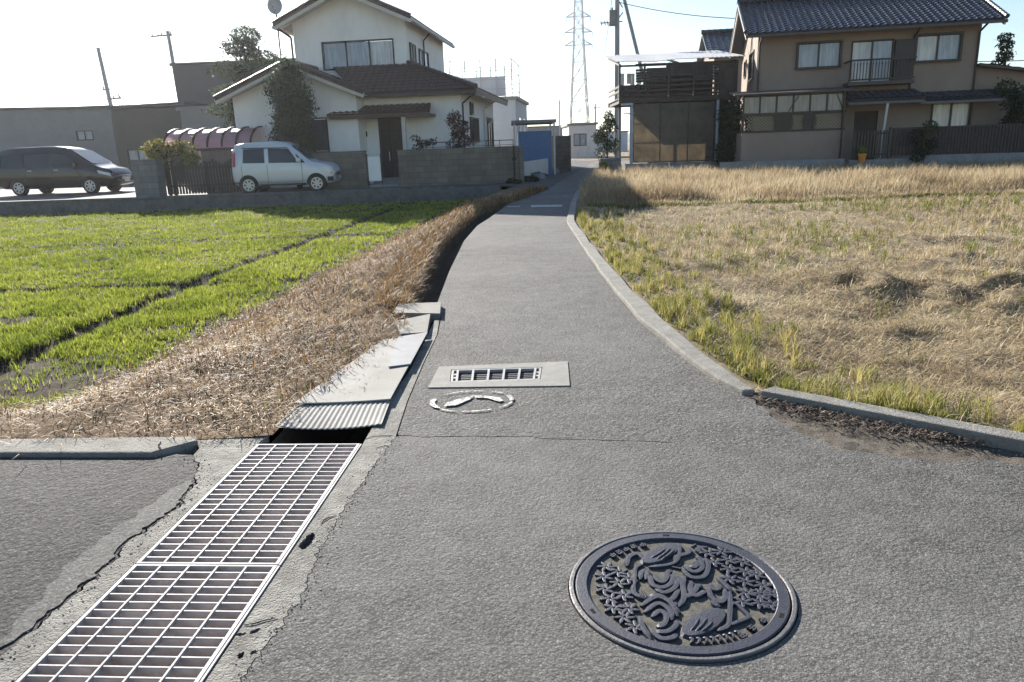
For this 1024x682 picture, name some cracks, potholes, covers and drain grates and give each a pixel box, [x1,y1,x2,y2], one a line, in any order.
manhole cover [569,531,798,664]
pothole [299,534,315,550]
drain grate [136,444,362,567]
drain grate [15,564,280,682]
